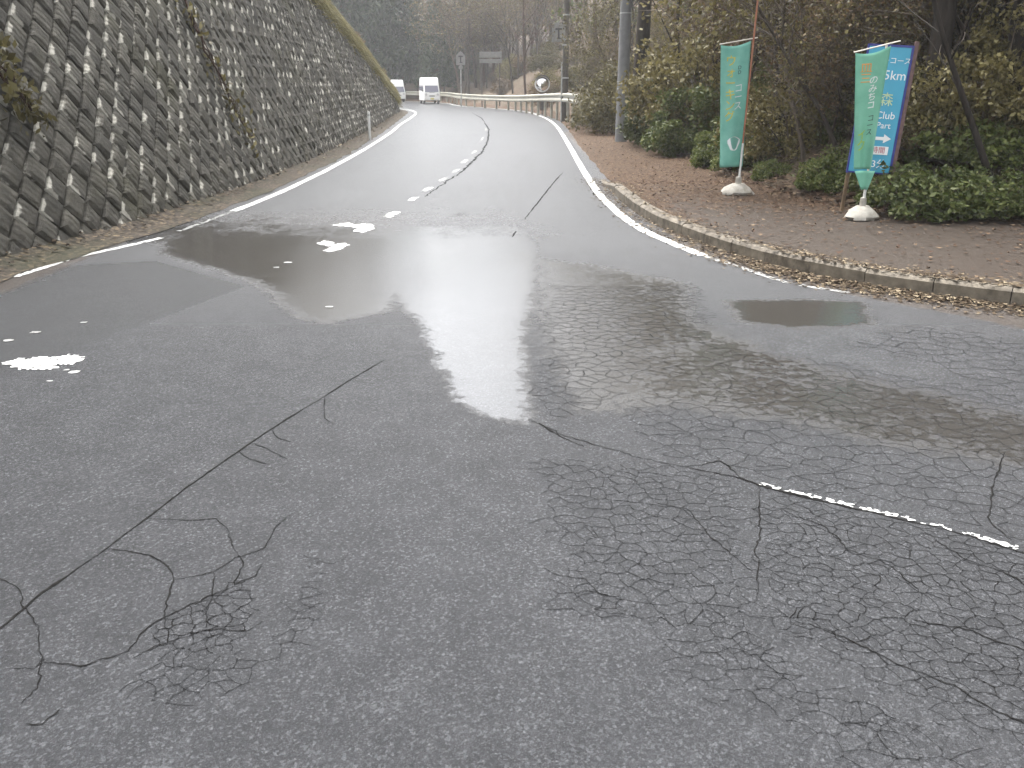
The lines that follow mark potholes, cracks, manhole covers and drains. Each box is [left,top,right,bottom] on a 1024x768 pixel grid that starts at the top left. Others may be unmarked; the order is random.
crack [620,326,1024,540]
crack [529,458,1024,768]
crack [0,515,348,725]
crack [530,284,717,447]
